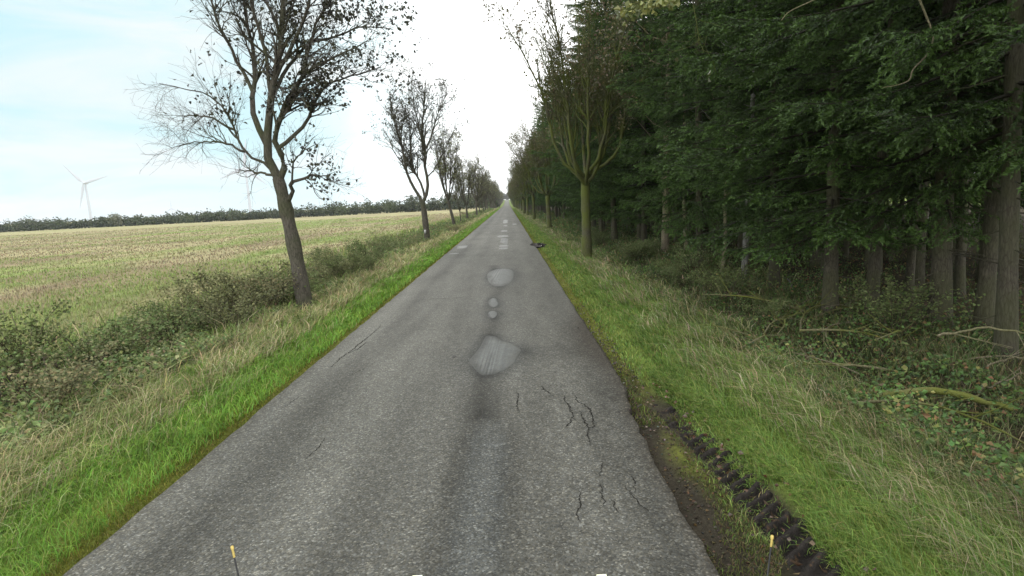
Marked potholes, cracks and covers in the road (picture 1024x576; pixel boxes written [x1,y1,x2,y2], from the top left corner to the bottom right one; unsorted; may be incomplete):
crack [541,386,595,444]
crack [599,462,649,511]
